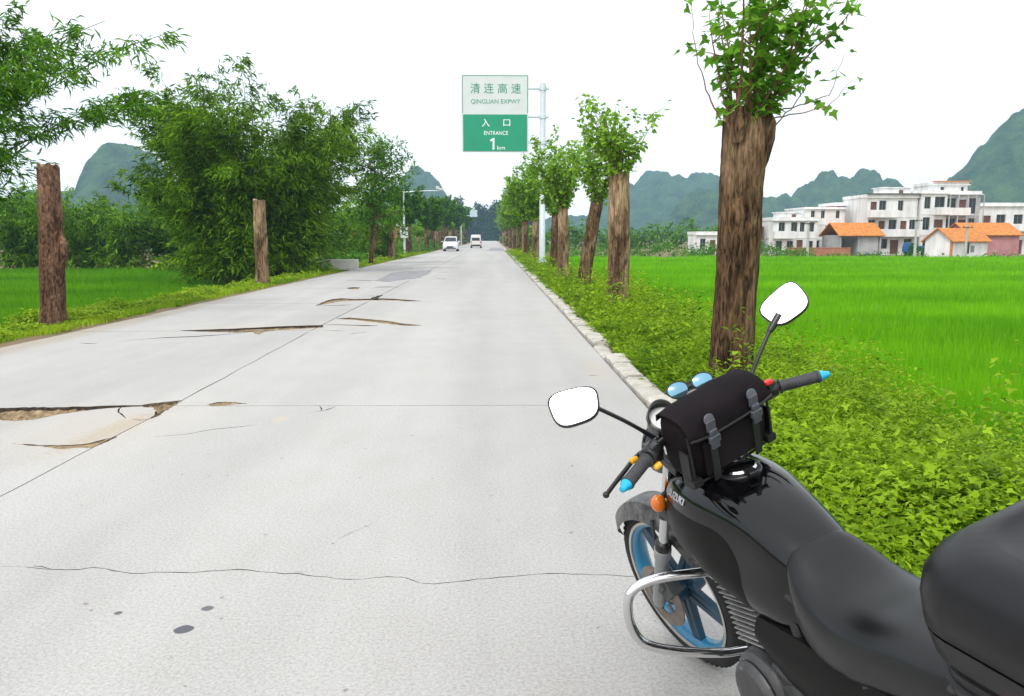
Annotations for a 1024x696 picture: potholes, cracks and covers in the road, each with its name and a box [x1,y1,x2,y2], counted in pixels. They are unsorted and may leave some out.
crack [5,566,634,584]
pothole [141,400,181,417]
pothole [0,405,141,421]
pothole [336,318,419,326]
pothole [180,325,323,335]
pothole [315,298,416,306]
pothole [23,436,117,449]
